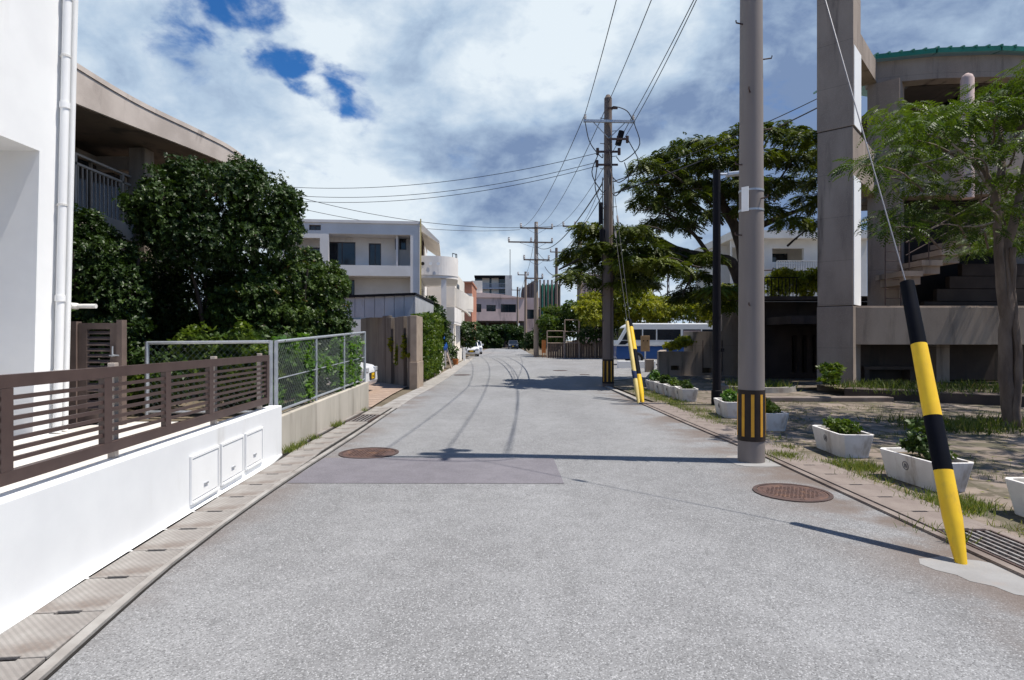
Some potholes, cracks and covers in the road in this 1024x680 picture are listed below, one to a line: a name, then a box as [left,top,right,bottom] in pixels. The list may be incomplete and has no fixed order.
drain grate [346,415,380,423]
manhole cover [753,483,834,503]
drain grate [936,530,1024,570]
manhole cover [338,447,399,459]
